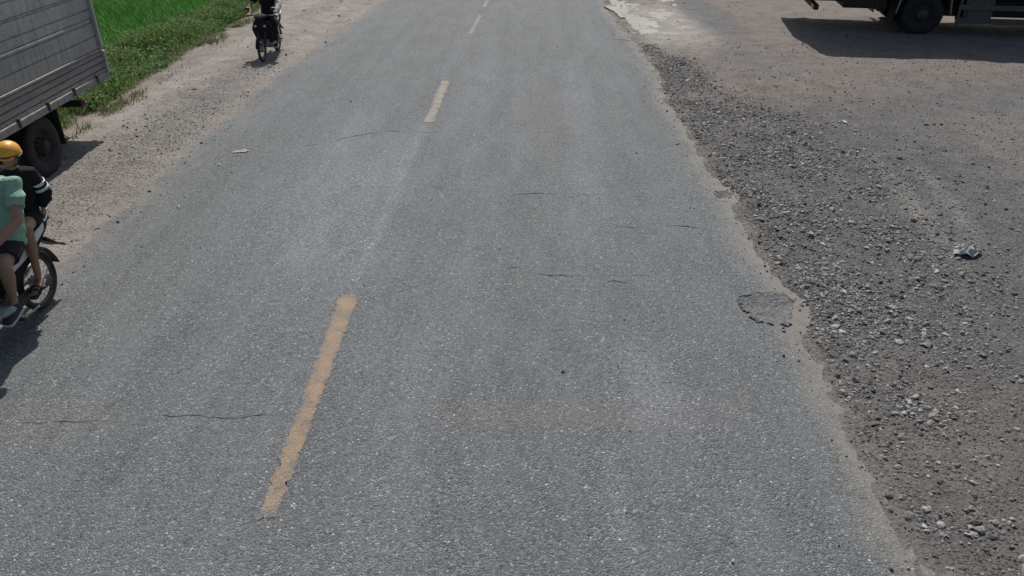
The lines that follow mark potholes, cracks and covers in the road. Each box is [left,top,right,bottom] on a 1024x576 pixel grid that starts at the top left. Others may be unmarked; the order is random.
pothole [737,291,794,327]
crack [17,369,271,424]
